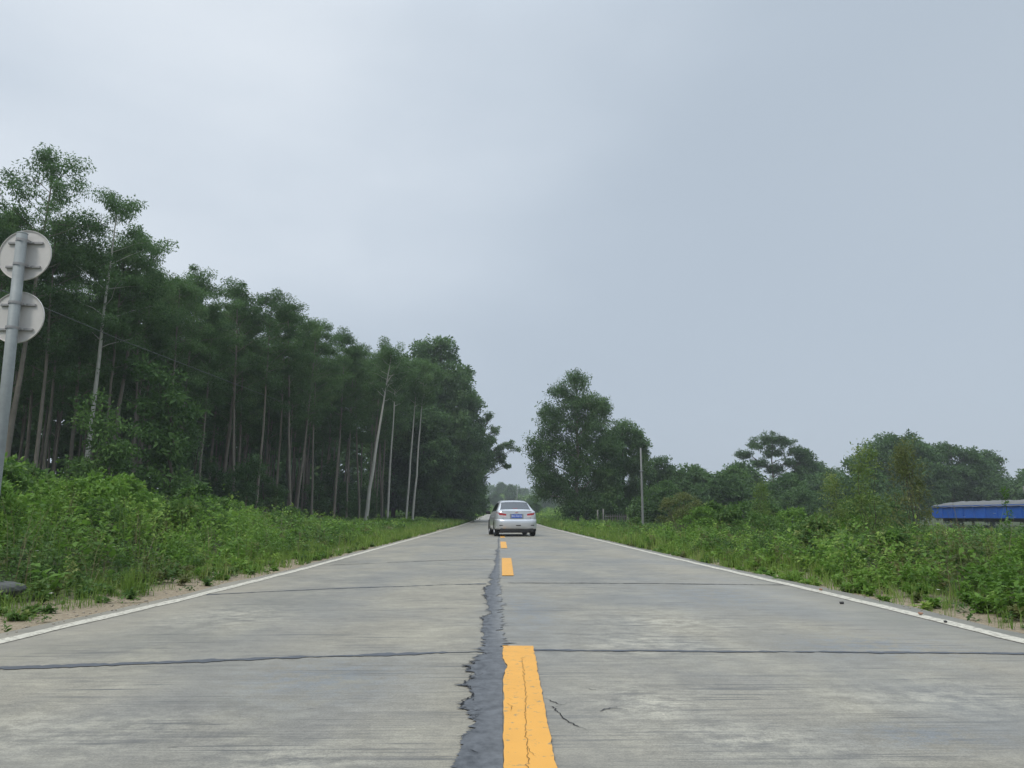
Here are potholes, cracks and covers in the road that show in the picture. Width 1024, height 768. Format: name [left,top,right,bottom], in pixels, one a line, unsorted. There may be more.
crack [511,649,1024,768]
